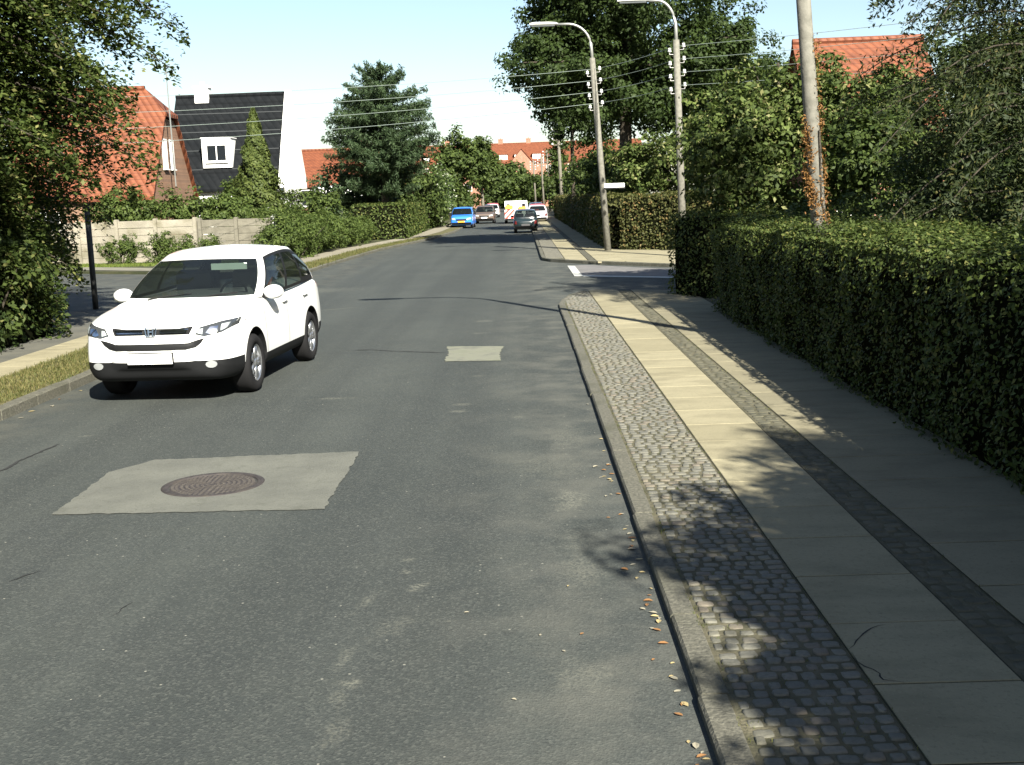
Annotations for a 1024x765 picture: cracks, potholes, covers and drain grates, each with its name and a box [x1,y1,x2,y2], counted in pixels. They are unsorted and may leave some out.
crack [0,444,58,471]
manhole cover [161,472,265,497]
crack [850,625,900,682]
